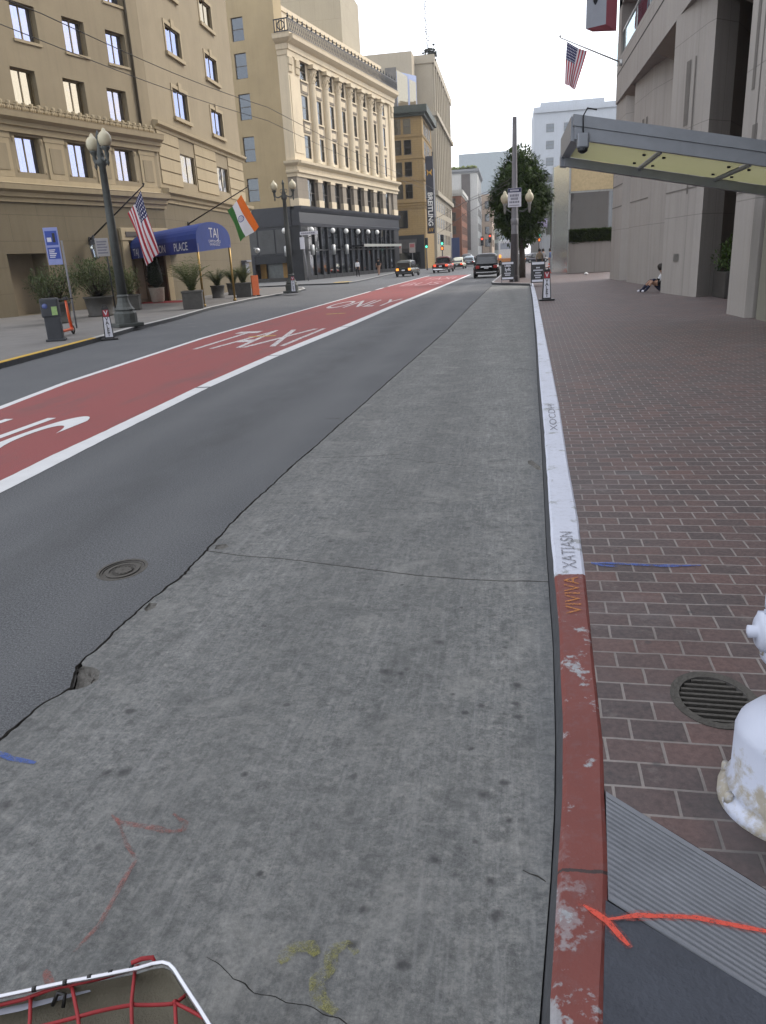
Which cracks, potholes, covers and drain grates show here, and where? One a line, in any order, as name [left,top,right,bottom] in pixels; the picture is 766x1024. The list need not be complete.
drain grate [670,671,757,730]
pothole [75,666,100,689]
crack [207,957,347,1024]
manhole cover [96,559,148,581]
